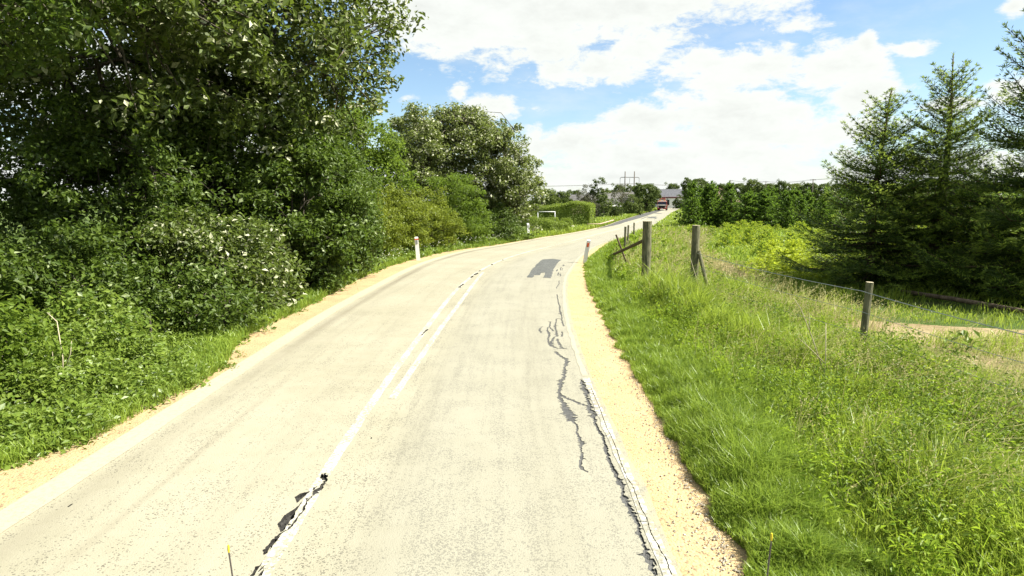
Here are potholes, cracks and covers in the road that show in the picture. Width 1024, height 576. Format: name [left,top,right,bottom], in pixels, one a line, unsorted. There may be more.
crack [539,265,672,576]
